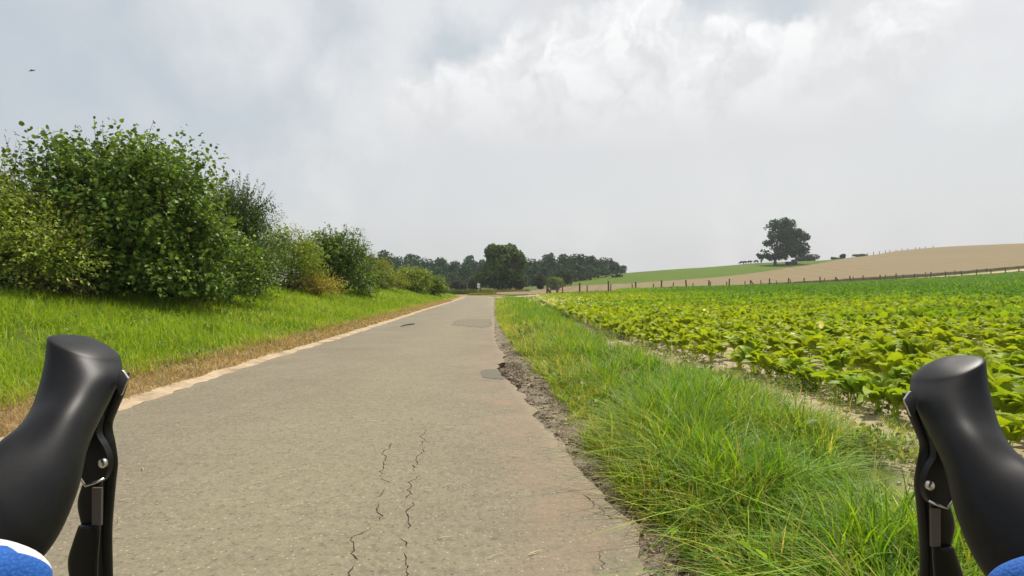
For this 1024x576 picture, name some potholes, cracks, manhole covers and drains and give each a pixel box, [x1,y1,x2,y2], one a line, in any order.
crack [348,446,390,576]
crack [401,432,425,576]
